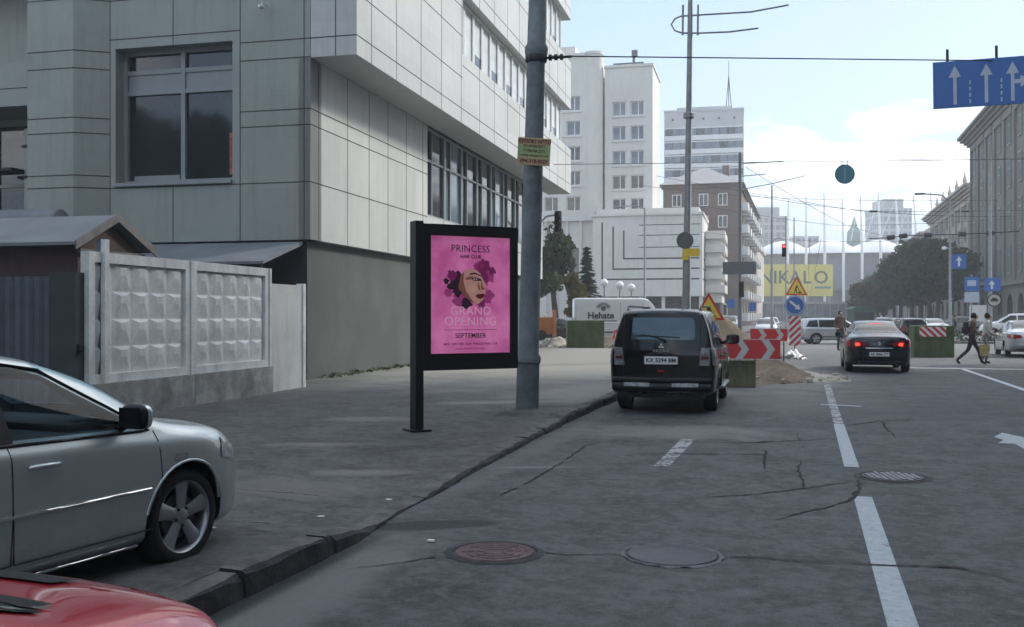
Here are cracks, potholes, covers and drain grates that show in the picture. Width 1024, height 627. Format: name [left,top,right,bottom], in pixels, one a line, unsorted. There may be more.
crack [500,442,599,495]
crack [661,419,911,469]
crack [714,460,861,519]
manhole cover [443,541,545,565]
crack [745,556,1017,582]
manhole cover [619,543,726,569]
